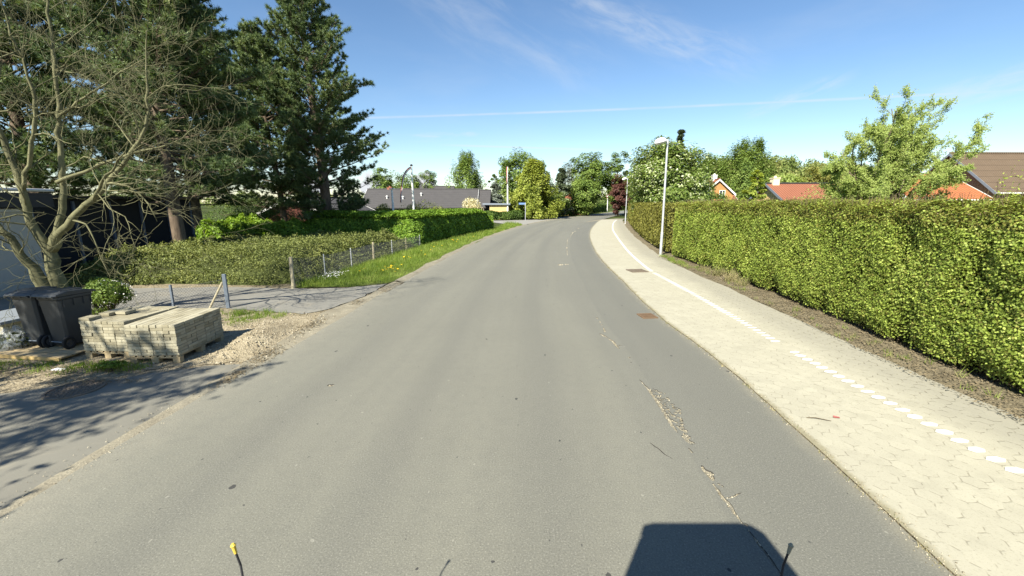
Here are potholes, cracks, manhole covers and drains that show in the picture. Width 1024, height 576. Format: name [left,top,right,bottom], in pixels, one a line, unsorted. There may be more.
manhole cover [41,379,107,400]
crack [596,317,632,363]
crack [640,380,695,458]
crack [712,483,780,575]
